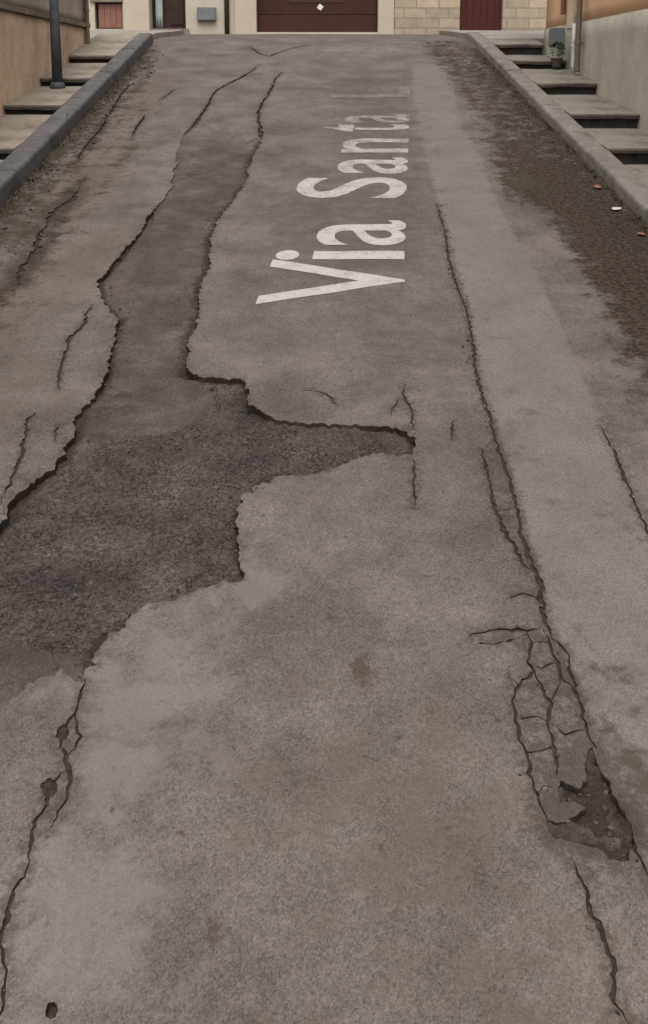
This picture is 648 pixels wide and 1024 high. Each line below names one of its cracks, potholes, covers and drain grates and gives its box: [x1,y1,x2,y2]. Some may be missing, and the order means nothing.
crack [16,190,79,282]
crack [391,388,414,430]
crack [57,307,92,390]
pothole [0,123,416,707]
crack [436,204,648,1022]
pothole [45,1002,58,1019]
crack [0,680,86,1015]
pothole [546,748,634,862]
